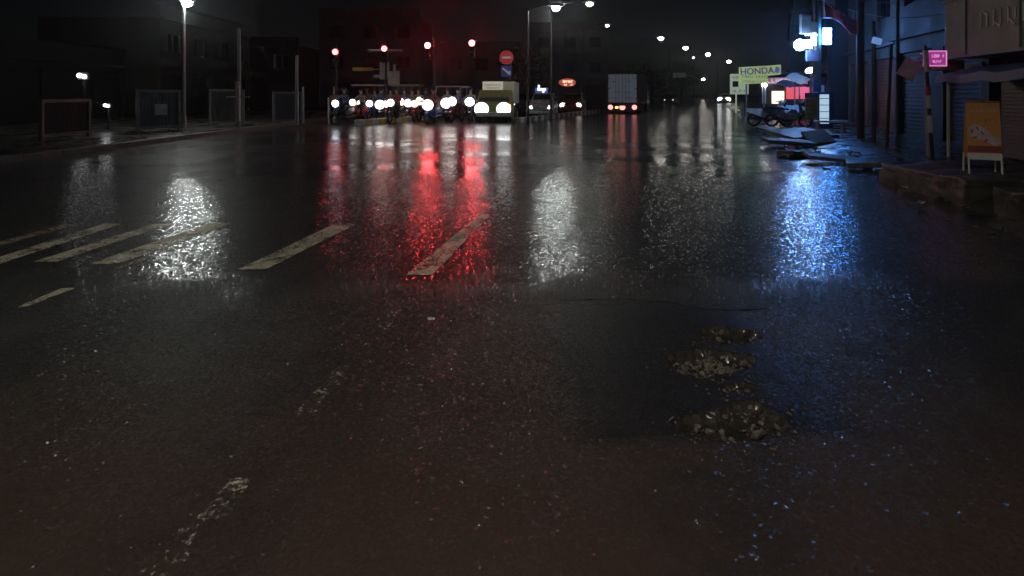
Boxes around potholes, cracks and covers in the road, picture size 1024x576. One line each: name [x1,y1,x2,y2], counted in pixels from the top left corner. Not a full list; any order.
pothole [706,376,777,400]
pothole [693,324,776,353]
pothole [646,341,774,390]
pothole [652,390,814,461]
